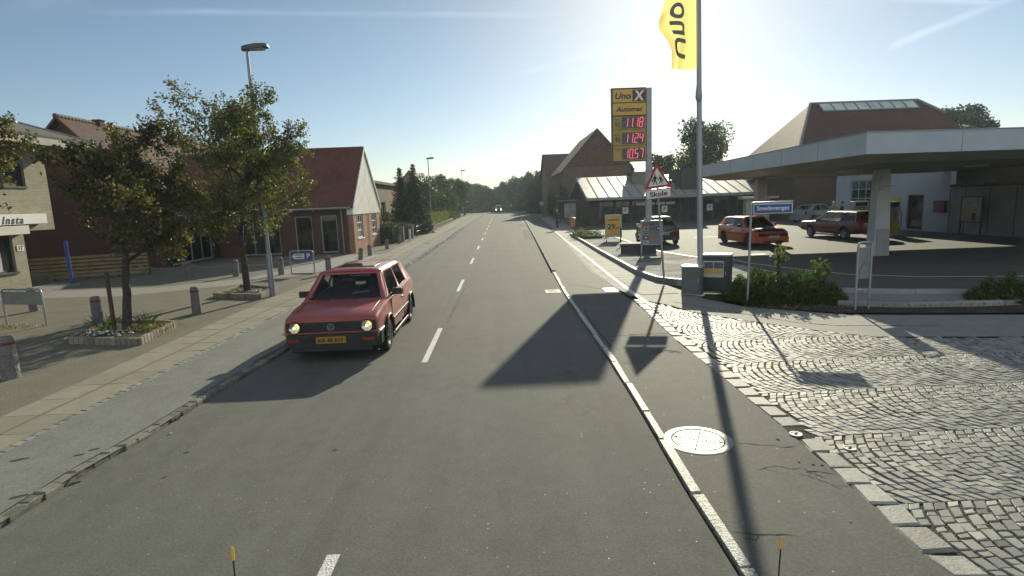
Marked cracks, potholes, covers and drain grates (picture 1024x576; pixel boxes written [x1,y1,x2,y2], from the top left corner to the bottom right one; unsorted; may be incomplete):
crack [734,531,796,541]
crack [758,466,853,487]
manhole cover [663,426,734,455]
